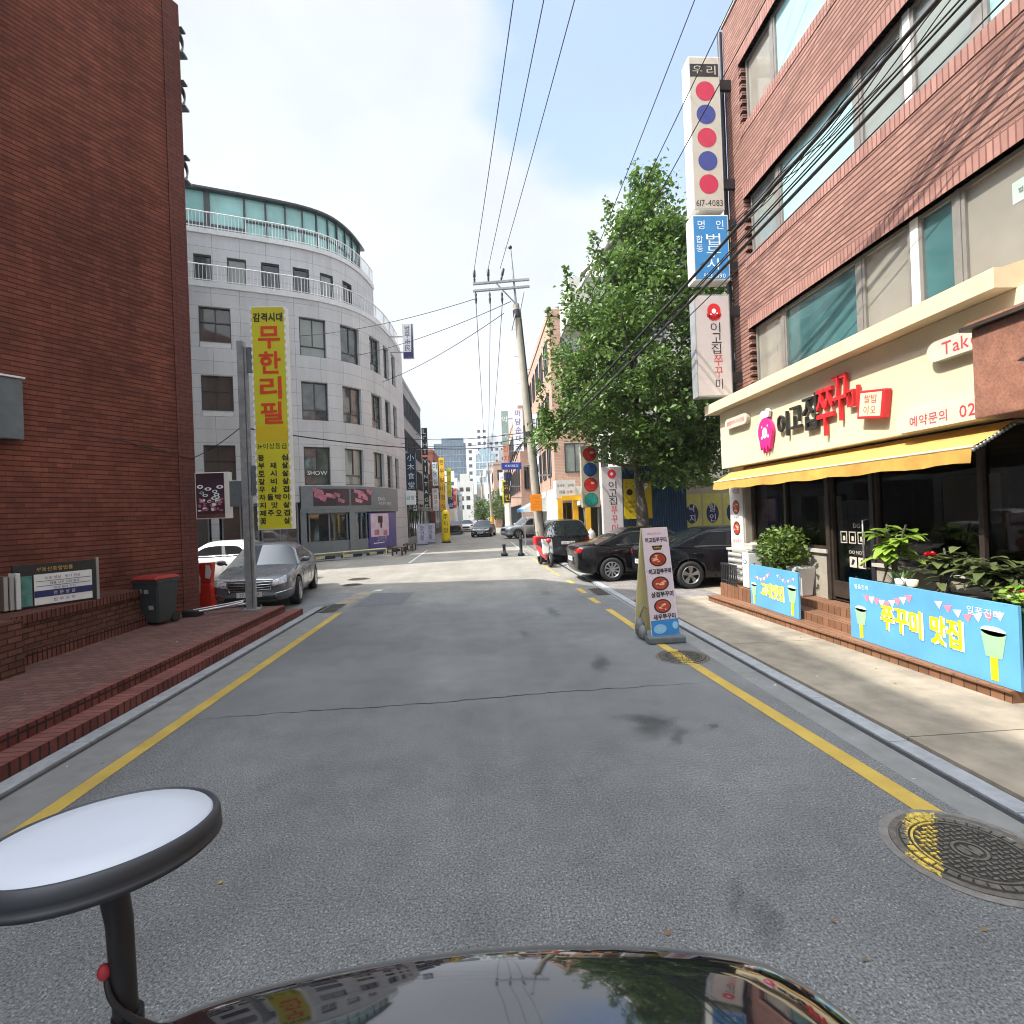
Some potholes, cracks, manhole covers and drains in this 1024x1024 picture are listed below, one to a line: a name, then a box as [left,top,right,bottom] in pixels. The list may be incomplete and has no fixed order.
manhole cover [654,649,711,665]
manhole cover [878,809,1024,908]
crack [199,681,714,720]
drain grate [318,604,347,613]
